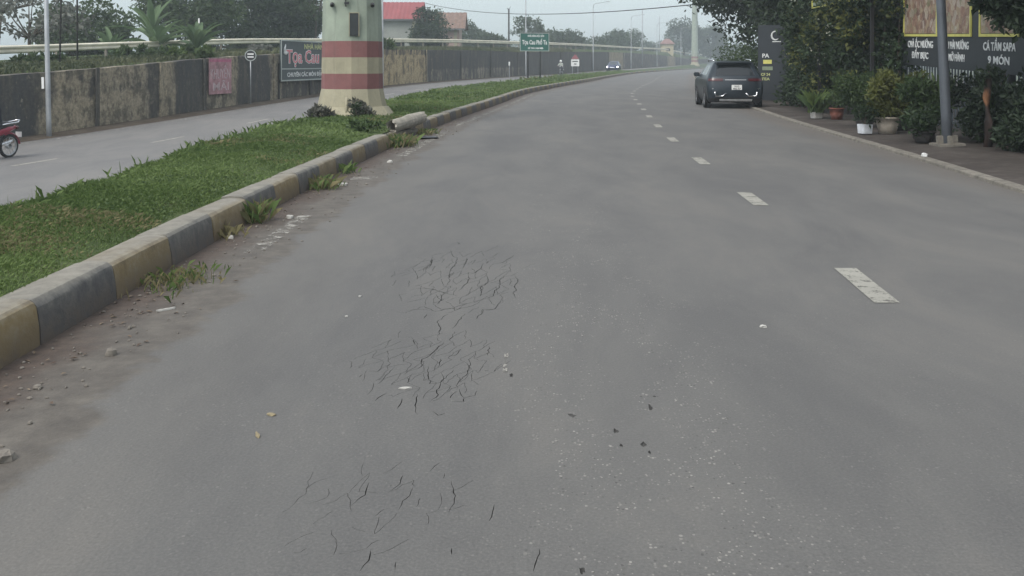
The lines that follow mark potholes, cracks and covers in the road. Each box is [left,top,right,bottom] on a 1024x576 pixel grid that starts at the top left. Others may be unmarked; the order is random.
crack [283,463,468,571]
crack [343,242,534,416]
